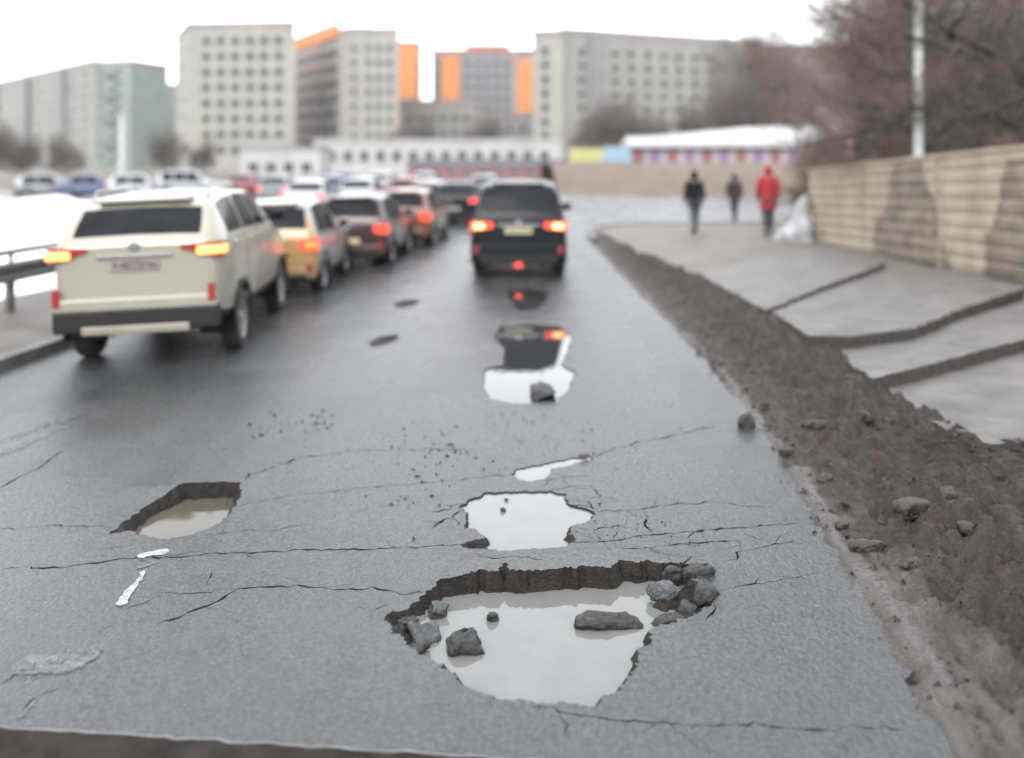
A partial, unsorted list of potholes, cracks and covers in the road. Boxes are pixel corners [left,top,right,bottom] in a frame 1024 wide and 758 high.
pothole [506,288,550,311]
pothole [482,324,576,403]
crack [544,474,806,562]
pothole [459,491,595,551]
crack [237,471,507,507]
crack [593,426,714,457]
crack [530,706,906,749]
crack [705,573,813,623]
crack [0,443,74,488]
crack [0,674,57,711]
pothole [368,334,400,348]
pothole [109,481,242,539]
